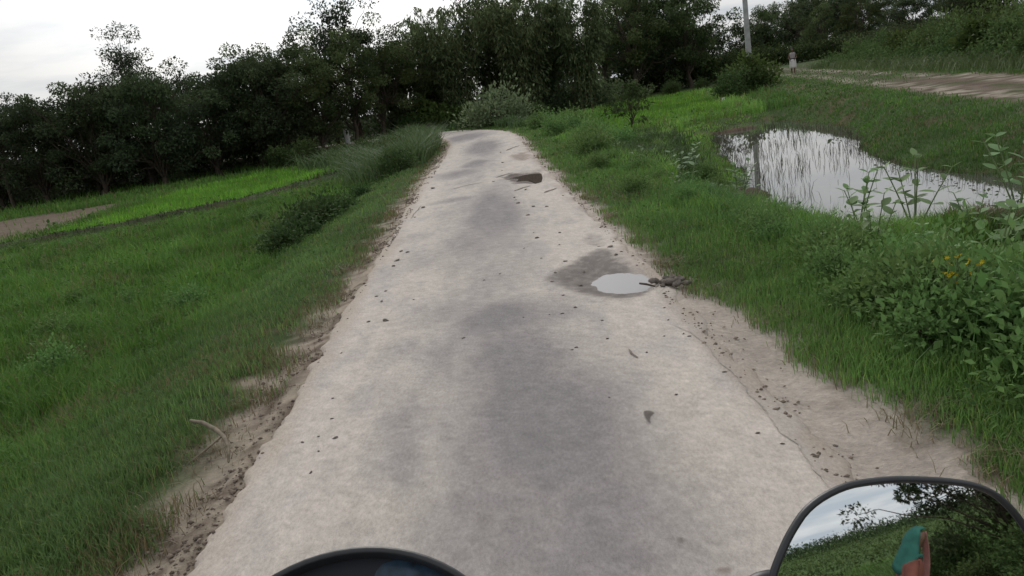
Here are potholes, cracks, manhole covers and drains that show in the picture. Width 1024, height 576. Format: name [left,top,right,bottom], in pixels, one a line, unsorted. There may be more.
pothole [498,170,546,185]
pothole [535,247,664,303]
